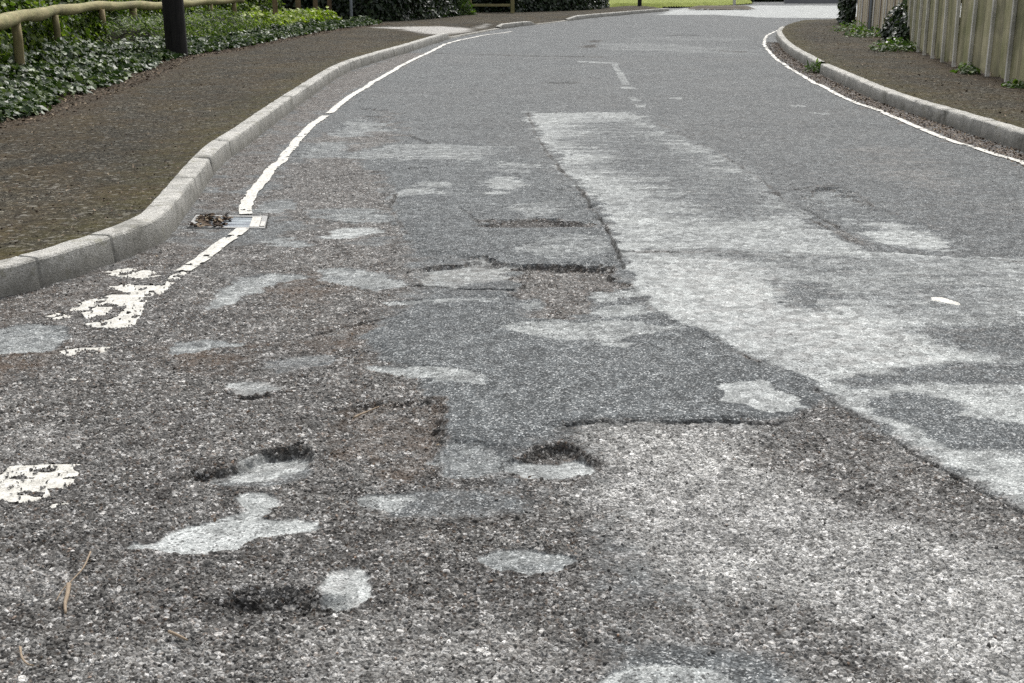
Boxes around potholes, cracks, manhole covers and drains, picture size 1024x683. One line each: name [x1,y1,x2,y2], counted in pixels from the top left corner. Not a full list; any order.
pothole [513,441,608,488]
pothole [197,581,355,620]
pothole [417,255,522,288]
pothole [183,468,211,482]
crack [456,112,799,376]
pothole [205,444,319,487]
